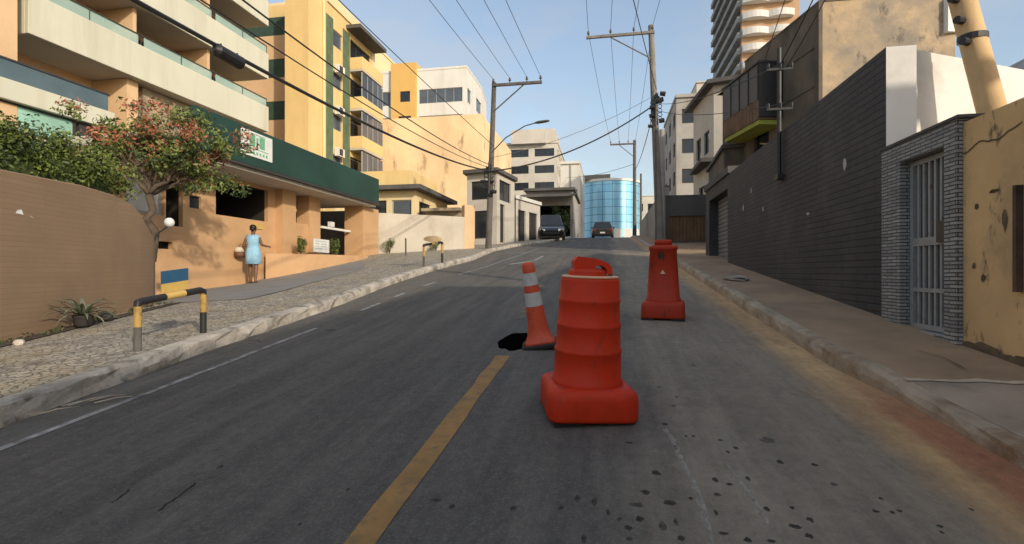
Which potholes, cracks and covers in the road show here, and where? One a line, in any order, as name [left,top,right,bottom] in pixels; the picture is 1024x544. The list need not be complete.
crack [158,483,196,512]
crack [663,428,769,544]
pothole [498,333,528,351]
